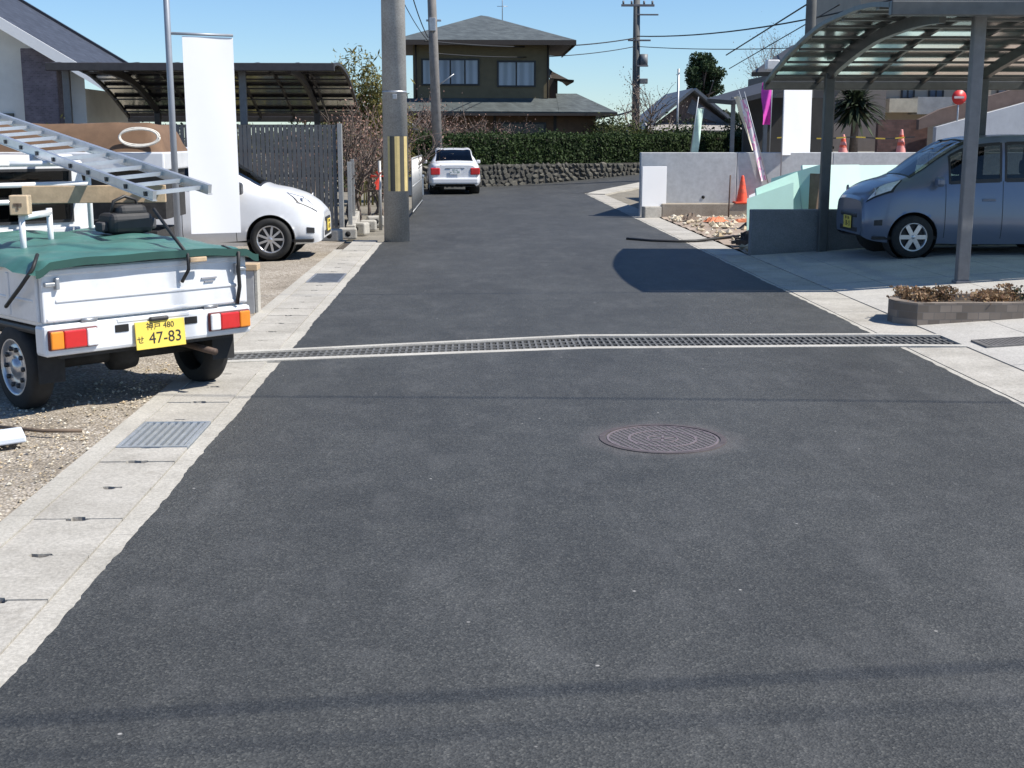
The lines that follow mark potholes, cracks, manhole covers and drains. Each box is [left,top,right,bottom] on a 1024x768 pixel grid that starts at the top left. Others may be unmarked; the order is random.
drain grate [971,336,1024,348]
drain grate [305,273,347,283]
drain grate [116,421,211,450]
manhole cover [599,424,727,454]
